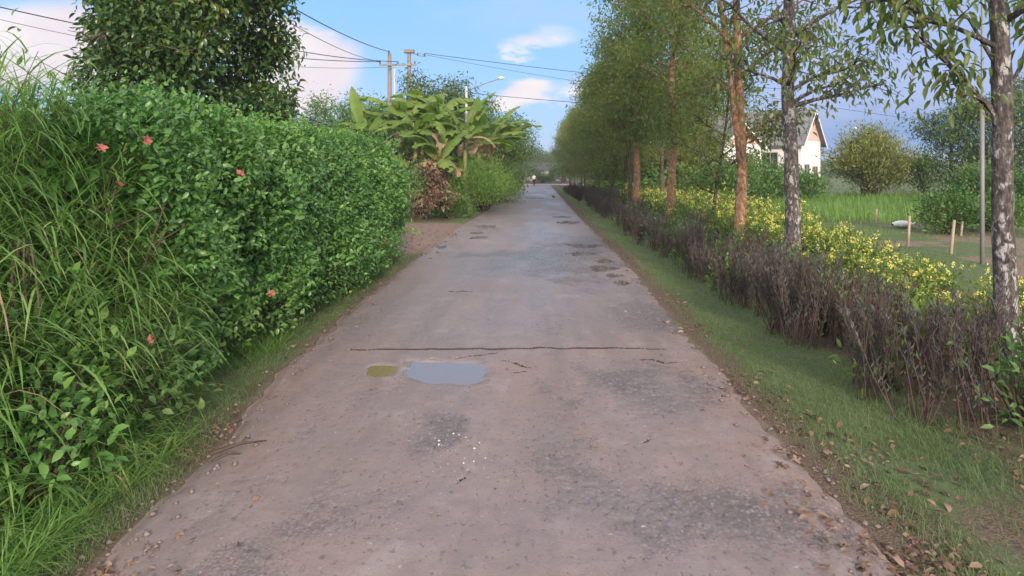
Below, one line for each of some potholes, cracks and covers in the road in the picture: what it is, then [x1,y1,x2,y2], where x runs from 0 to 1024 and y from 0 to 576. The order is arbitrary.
crack [348,346,677,373]
